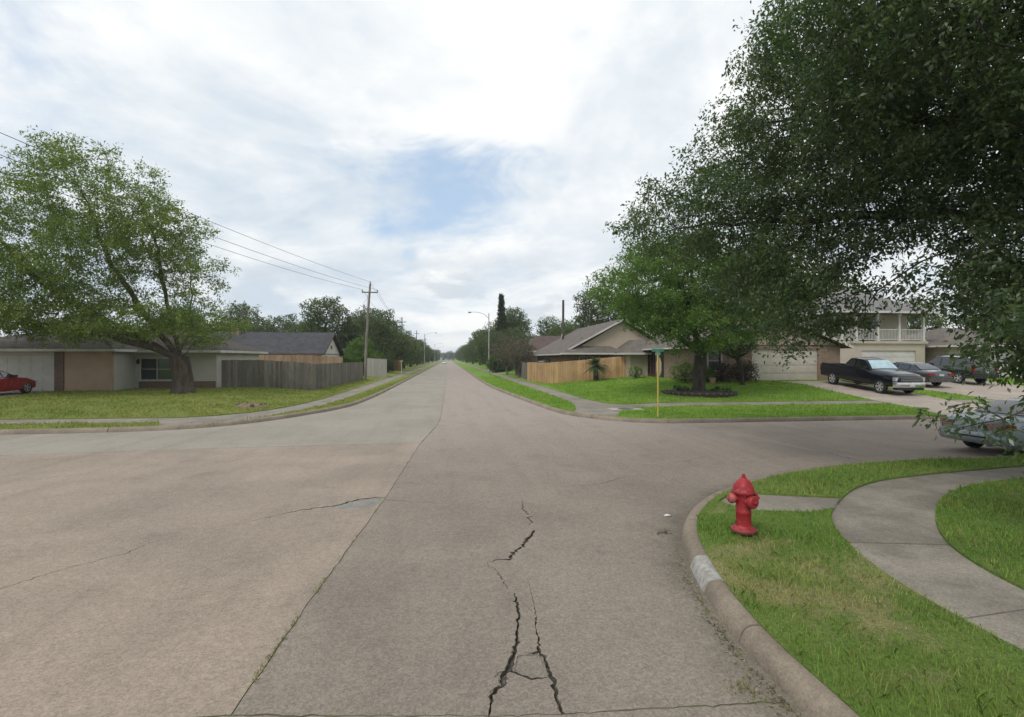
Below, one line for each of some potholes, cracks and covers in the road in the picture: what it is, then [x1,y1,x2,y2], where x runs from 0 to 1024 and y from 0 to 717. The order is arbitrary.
crack [487,498,565,716]
